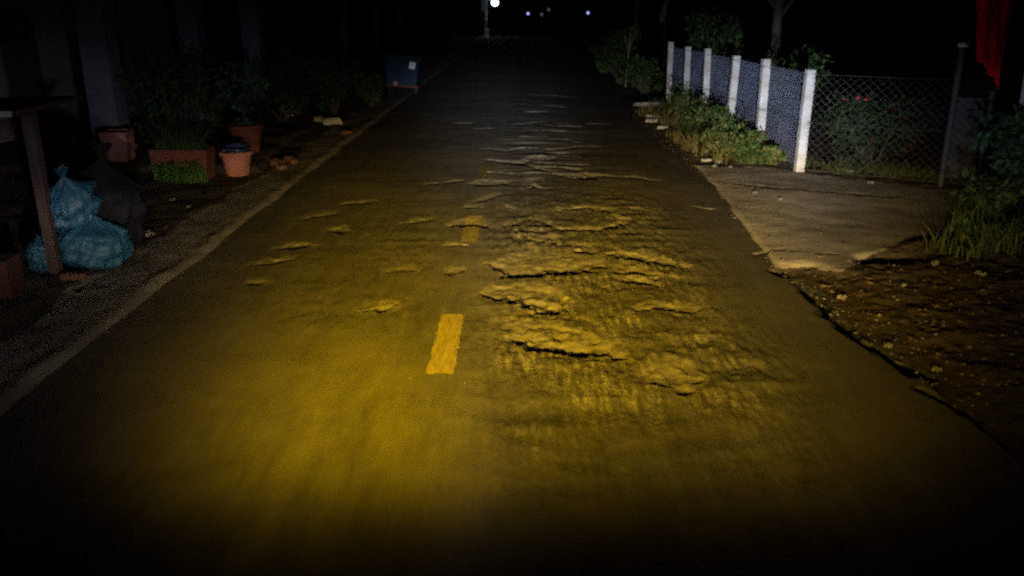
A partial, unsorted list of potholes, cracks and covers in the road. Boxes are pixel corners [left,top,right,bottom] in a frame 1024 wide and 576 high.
pothole [442,216,494,229]
pothole [288,210,342,221]
pothole [351,297,411,314]
pothole [603,213,631,221]
pothole [235,276,276,288]
pothole [602,245,695,271]
pothole [496,316,635,363]
pothole [636,352,713,397]
pothole [479,250,611,281]
pothole [380,264,421,274]
pothole [531,218,631,233]
